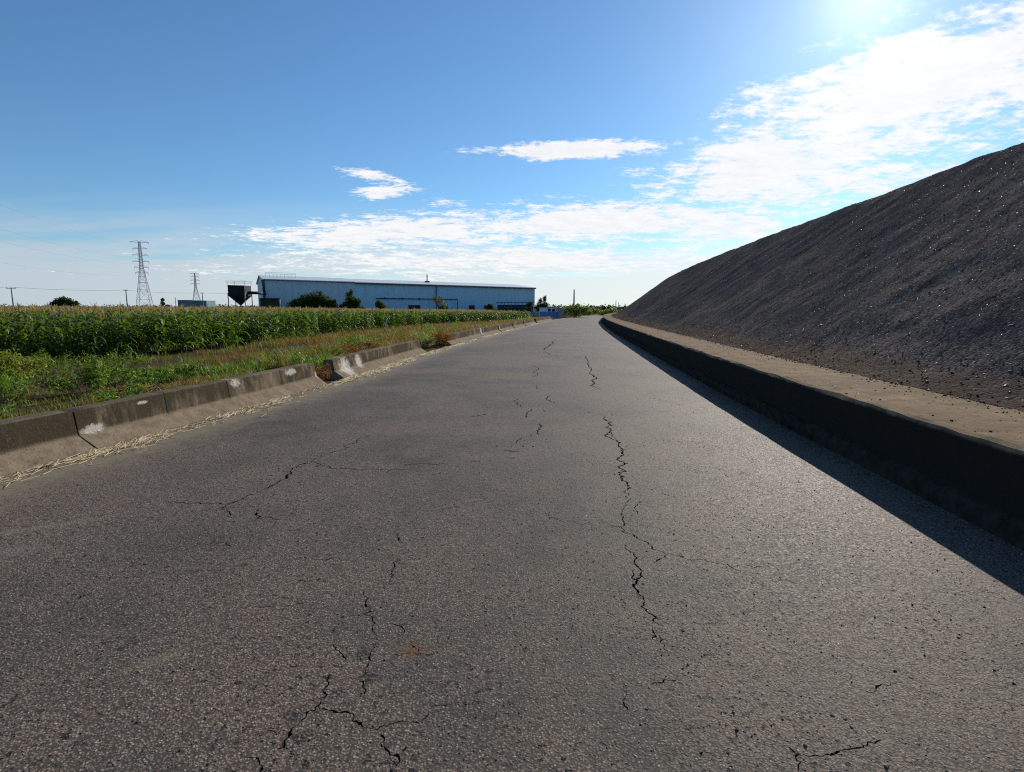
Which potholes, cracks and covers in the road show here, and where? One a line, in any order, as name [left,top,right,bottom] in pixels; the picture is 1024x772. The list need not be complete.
crack [168,435,480,521]
crack [505,341,557,459]
crack [789,739,909,771]
crack [248,533,459,772]
crack [604,419,762,653]
